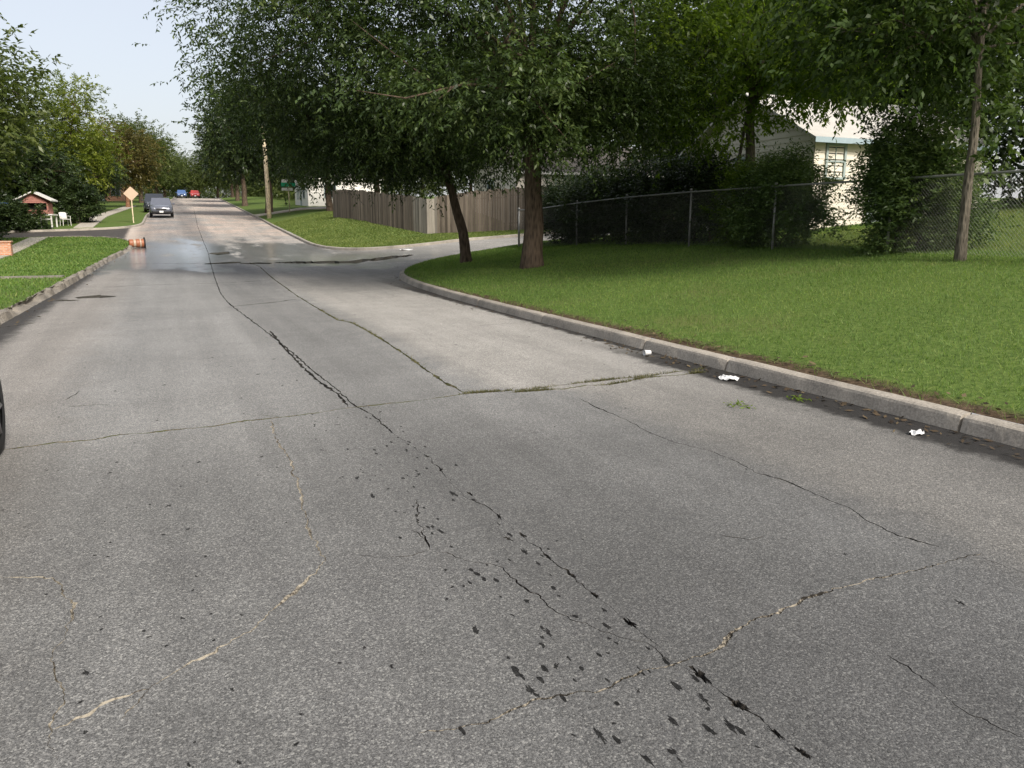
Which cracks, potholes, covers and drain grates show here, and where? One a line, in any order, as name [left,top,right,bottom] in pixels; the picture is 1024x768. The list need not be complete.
crack [354,502,1006,733]
crack [3,421,326,758]
crack [583,400,944,549]
crack [887,655,1021,737]
